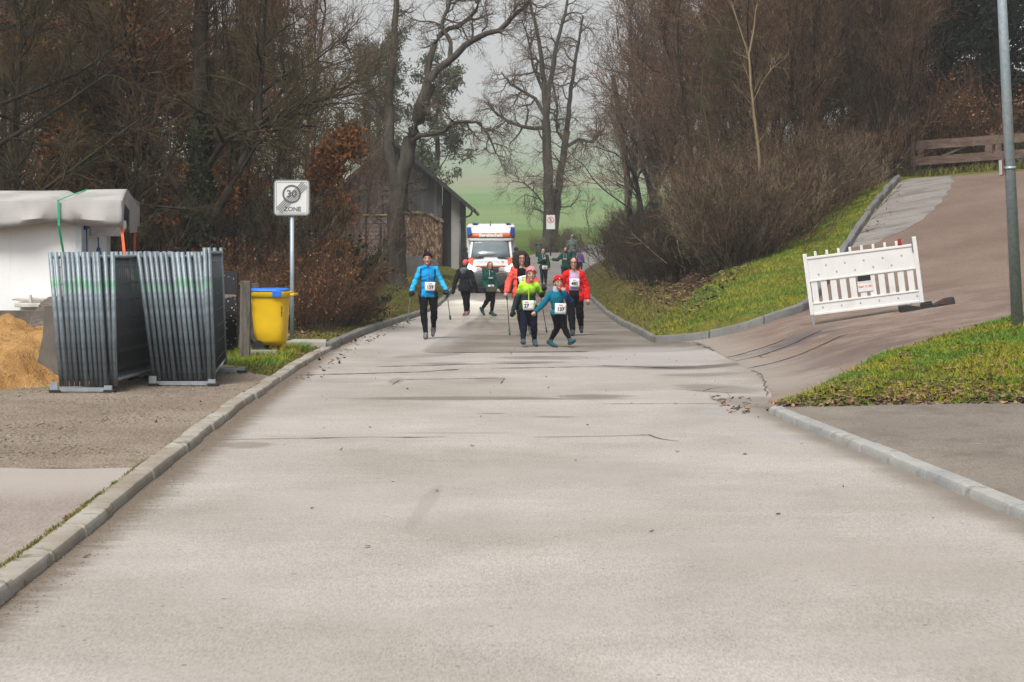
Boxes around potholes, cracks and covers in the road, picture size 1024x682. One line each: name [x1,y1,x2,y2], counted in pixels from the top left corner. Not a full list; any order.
crack [730,330,846,368]
crack [306,363,580,375]
